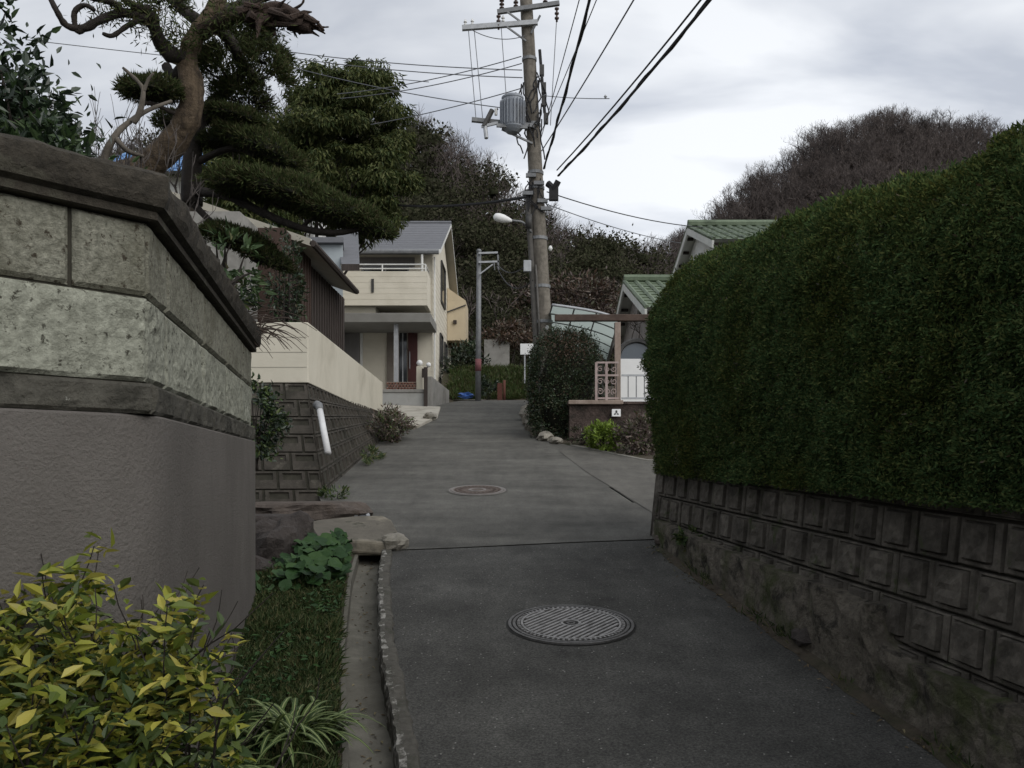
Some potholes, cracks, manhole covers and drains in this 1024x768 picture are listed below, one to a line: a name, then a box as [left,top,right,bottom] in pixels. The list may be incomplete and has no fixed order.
manhole cover [506,605,636,646]
manhole cover [447,485,508,496]
